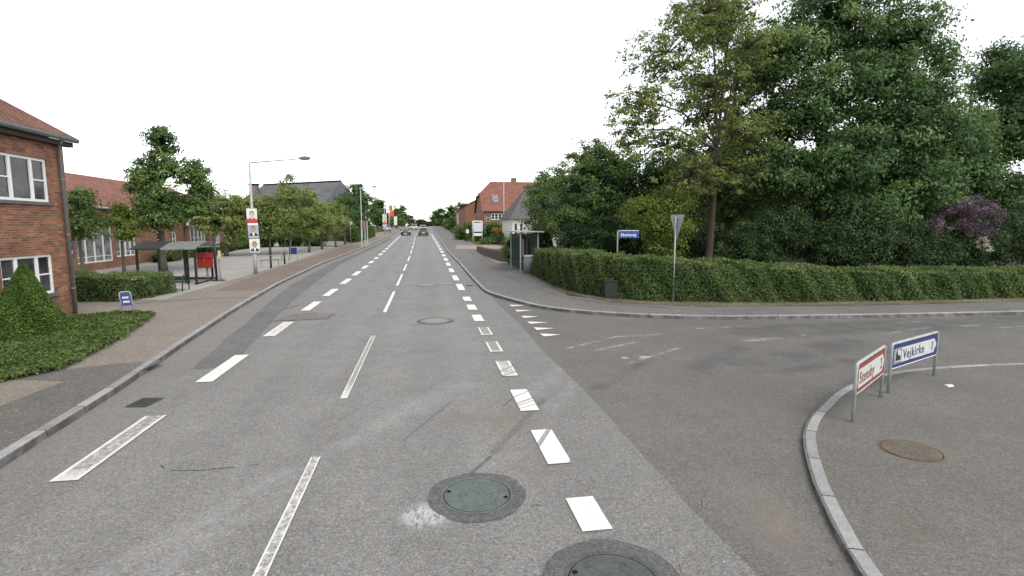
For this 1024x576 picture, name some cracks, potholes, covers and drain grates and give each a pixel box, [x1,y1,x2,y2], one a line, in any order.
manhole cover [541,539,681,576]
manhole cover [879,439,946,462]
manhole cover [428,473,526,523]
drain grate [125,398,163,407]
